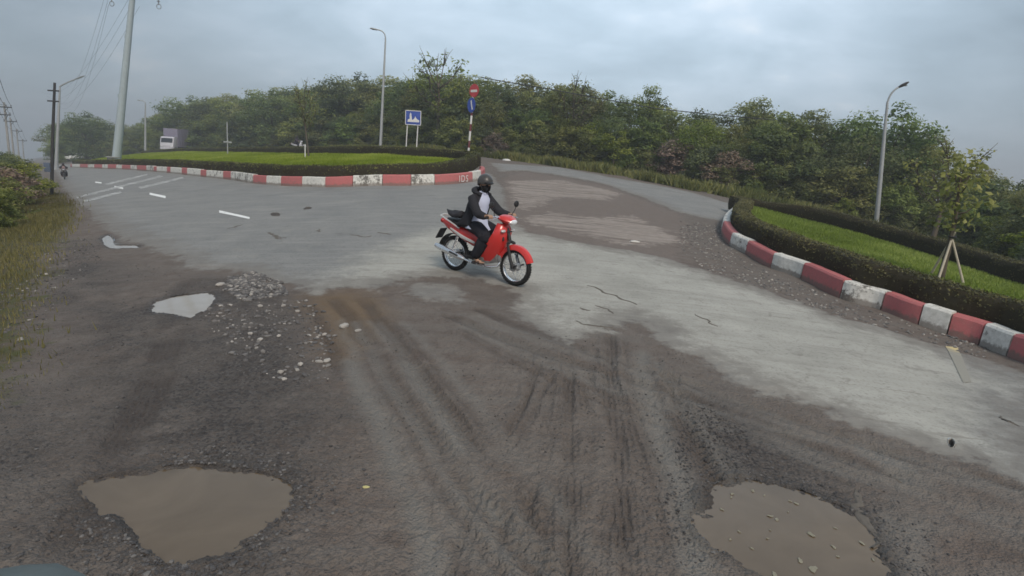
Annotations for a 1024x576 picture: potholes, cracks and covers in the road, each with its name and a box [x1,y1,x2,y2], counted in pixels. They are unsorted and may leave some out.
pothole [143,291,223,320]
pothole [678,469,911,576]
pothole [97,234,143,250]
pothole [67,456,310,576]
crack [577,285,637,331]
